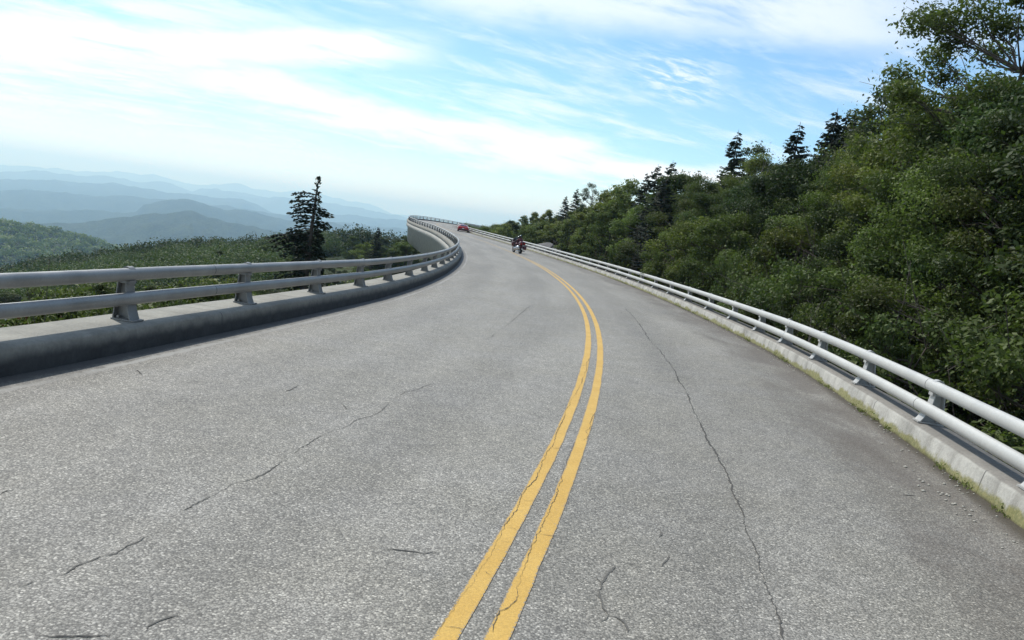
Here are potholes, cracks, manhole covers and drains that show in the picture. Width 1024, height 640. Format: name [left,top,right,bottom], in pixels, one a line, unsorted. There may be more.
crack [597,565,629,633]
crack [629,312,784,639]
crack [19,309,526,587]
